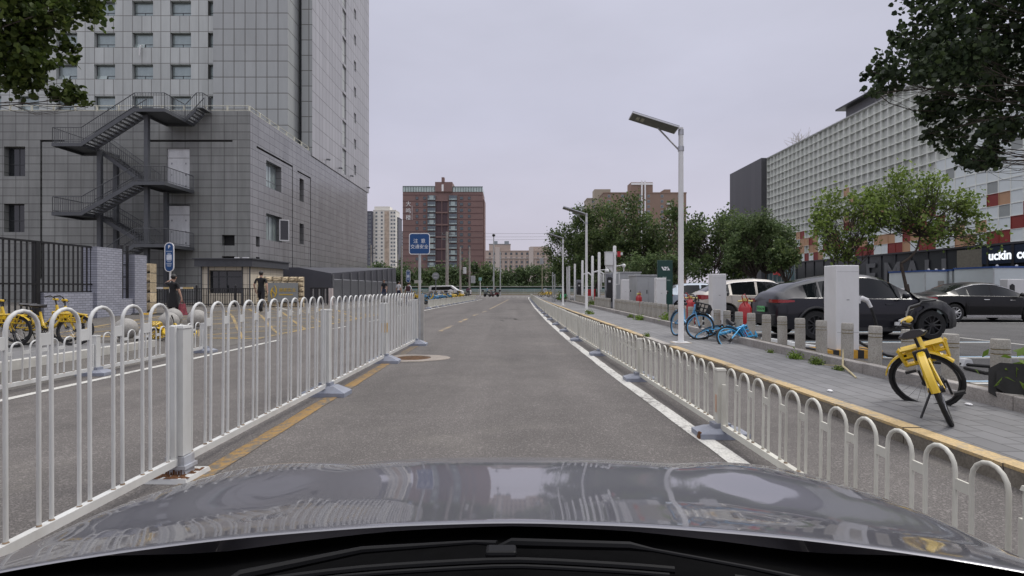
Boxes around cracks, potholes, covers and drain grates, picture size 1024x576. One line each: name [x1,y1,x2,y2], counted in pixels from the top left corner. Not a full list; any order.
manhole cover [394,354,450,362]
